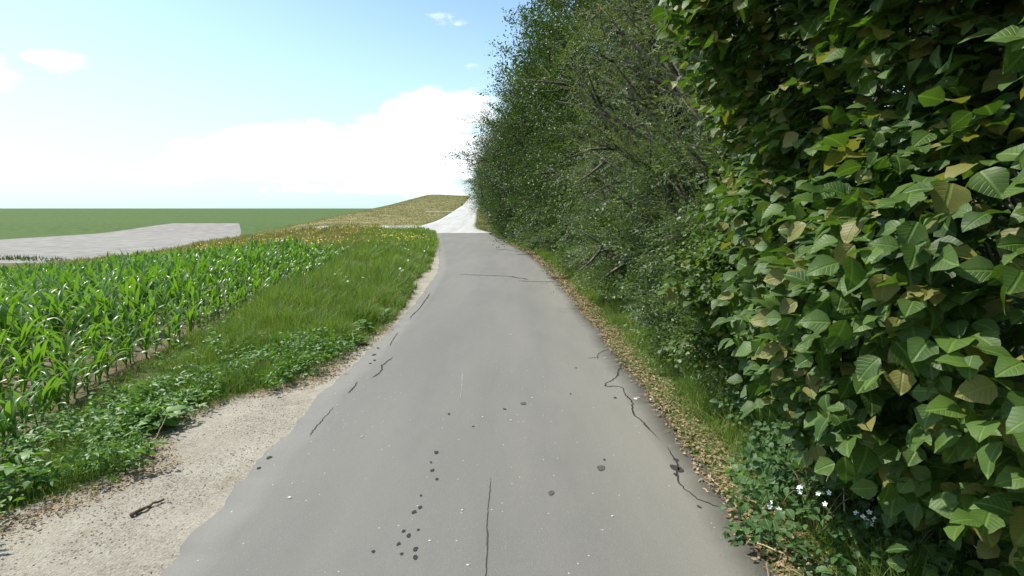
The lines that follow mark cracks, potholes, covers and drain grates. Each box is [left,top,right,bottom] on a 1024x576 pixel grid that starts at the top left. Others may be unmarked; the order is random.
crack [310,334,397,434]
crack [592,349,719,507]
